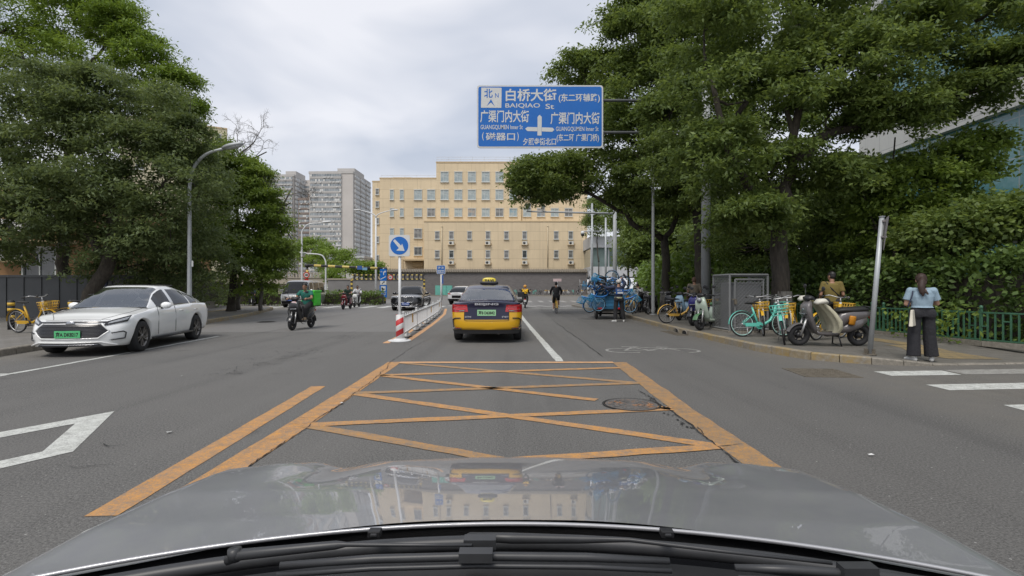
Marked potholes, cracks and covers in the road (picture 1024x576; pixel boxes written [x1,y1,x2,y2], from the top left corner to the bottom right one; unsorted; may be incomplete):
crack [638,389,742,463]
manhole cover [782,368,863,378]
manhole cover [602,398,661,411]
